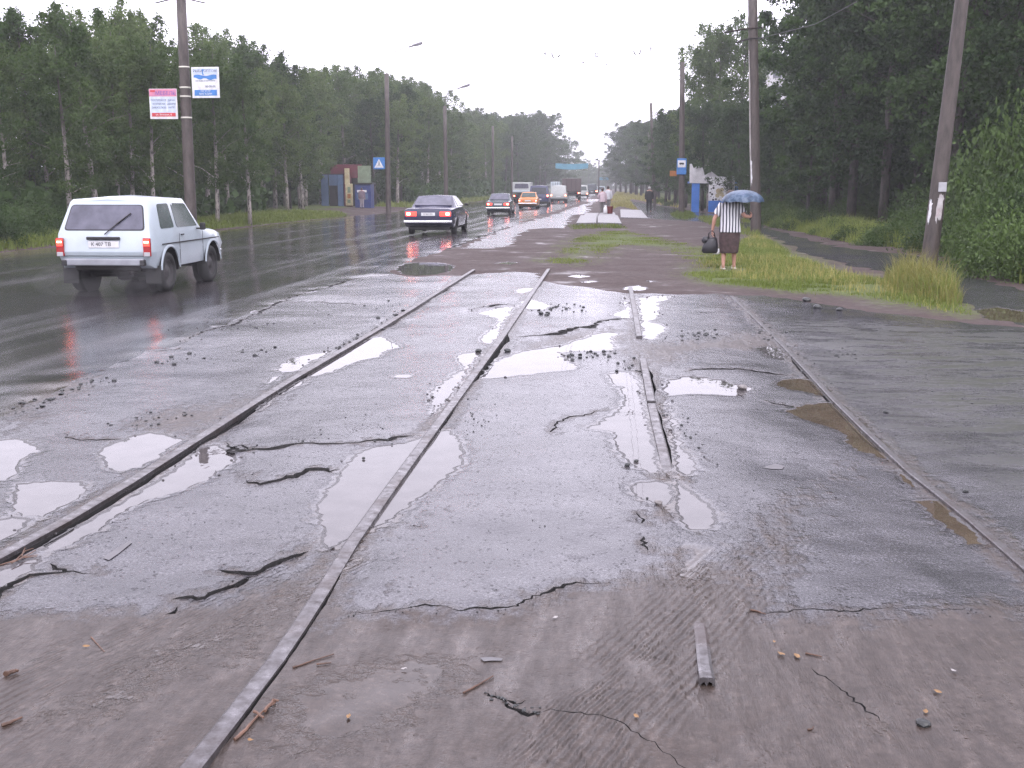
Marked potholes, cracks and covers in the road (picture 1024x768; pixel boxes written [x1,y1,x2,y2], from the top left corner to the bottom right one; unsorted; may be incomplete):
crack [811,666,901,730]
crack [487,692,685,768]
pothole [629,481,676,505]
crack [0,563,99,597]
pothole [315,430,466,550]
crack [226,435,408,485]
crack [550,410,600,432]
pothole [674,480,718,530]
crack [523,318,627,337]
crack [346,581,615,615]
crack [165,551,308,615]
pothole [394,262,455,276]
